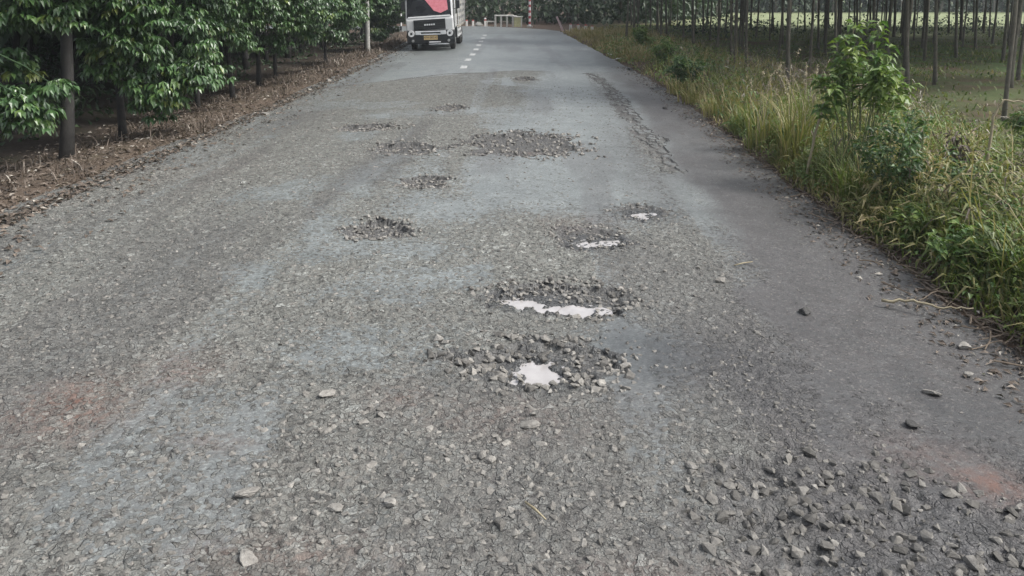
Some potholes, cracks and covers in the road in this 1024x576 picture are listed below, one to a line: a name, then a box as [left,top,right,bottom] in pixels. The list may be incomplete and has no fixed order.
crack [582,73,688,174]
pothole [394,173,457,190]
pothole [321,122,415,133]
pothole [333,214,425,242]
pothole [450,128,608,161]
pothole [429,103,470,112]
pothole [597,202,674,223]
pothole [423,330,642,432]
pothole [432,274,703,338]
pothole [363,138,455,156]
pothole [531,222,641,258]
